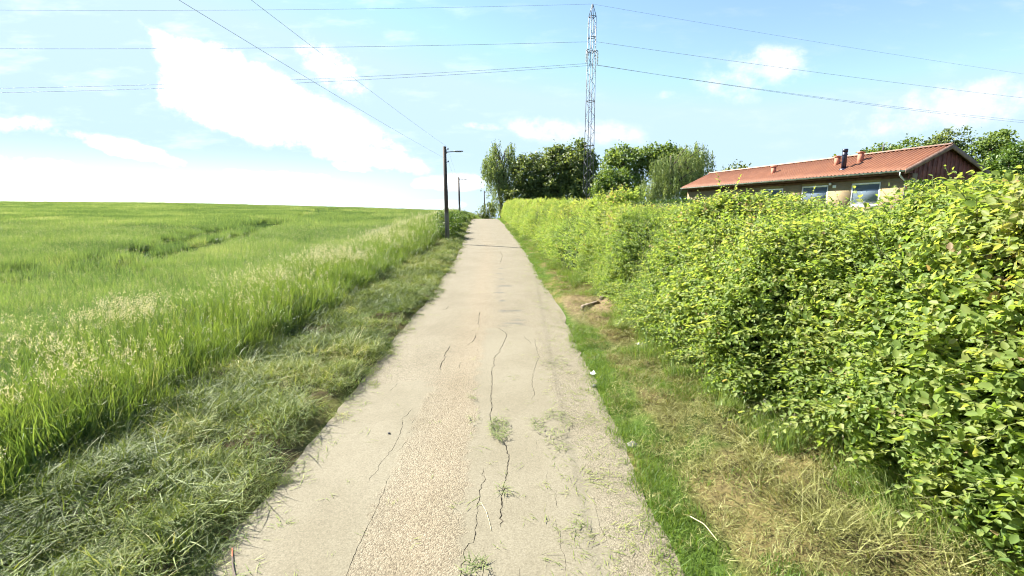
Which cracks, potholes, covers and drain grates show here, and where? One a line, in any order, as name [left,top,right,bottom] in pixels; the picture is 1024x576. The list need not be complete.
crack [460,329,510,576]
